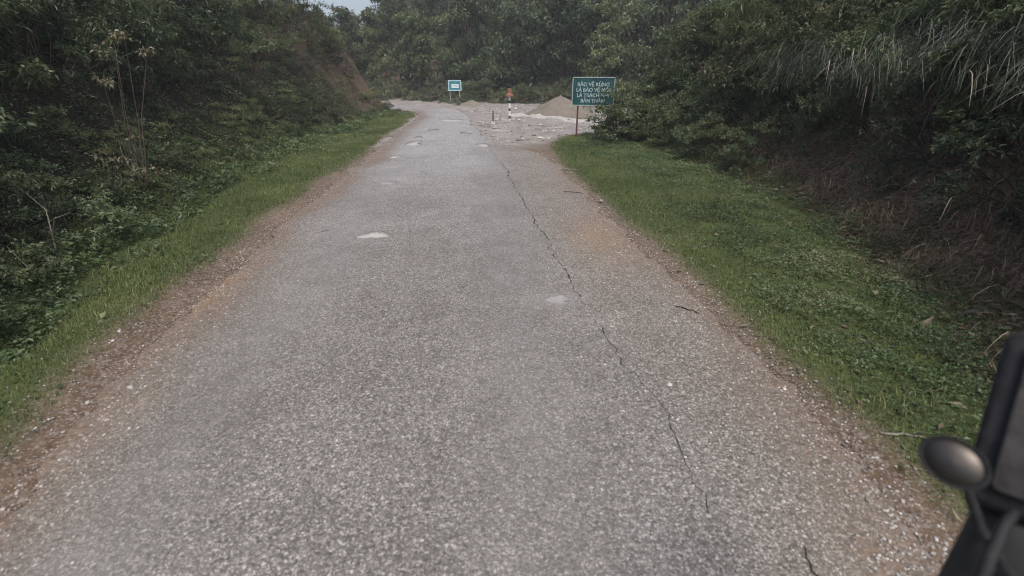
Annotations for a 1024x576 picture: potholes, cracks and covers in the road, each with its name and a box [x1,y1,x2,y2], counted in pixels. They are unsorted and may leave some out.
crack [490,150,709,514]
